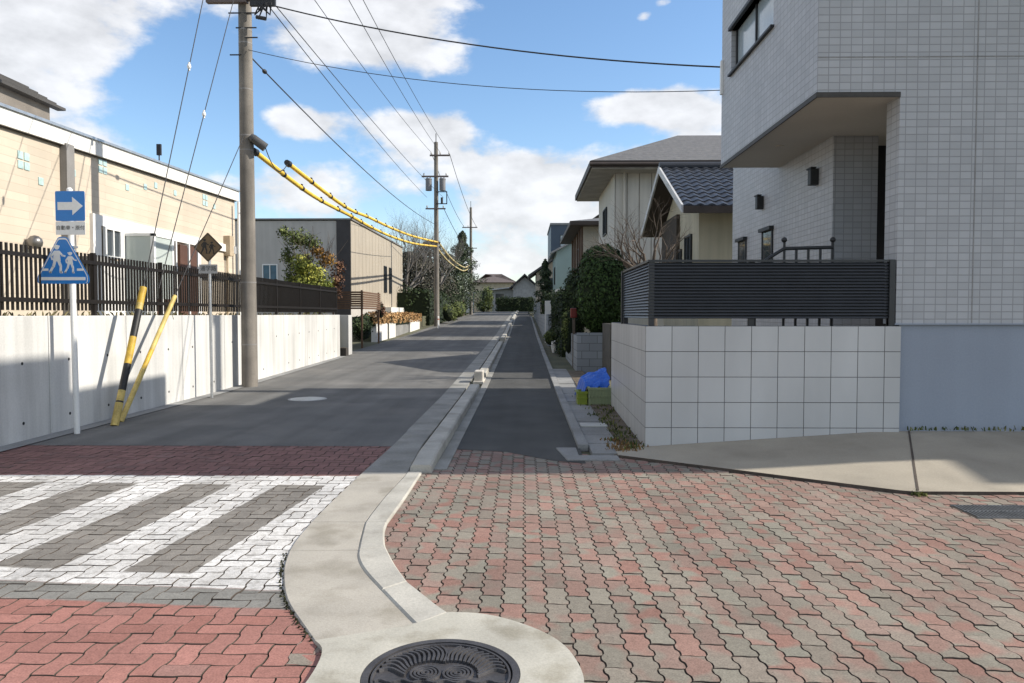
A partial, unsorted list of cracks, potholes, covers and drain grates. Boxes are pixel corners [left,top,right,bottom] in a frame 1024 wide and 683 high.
manhole cover [360,639,520,683]
drain grate [950,505,1024,519]
